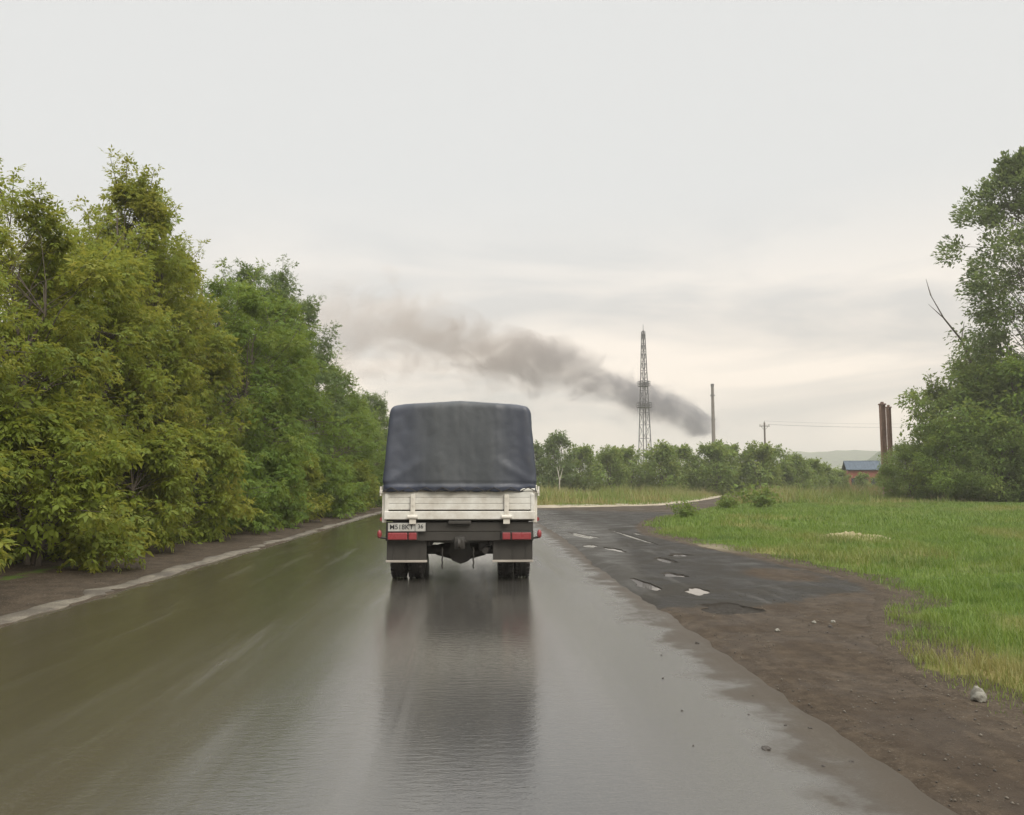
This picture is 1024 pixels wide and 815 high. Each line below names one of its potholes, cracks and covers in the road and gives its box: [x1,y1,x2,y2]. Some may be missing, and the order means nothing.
pothole [699,602,765,615]
pothole [630,578,662,591]
pothole [684,587,710,596]
